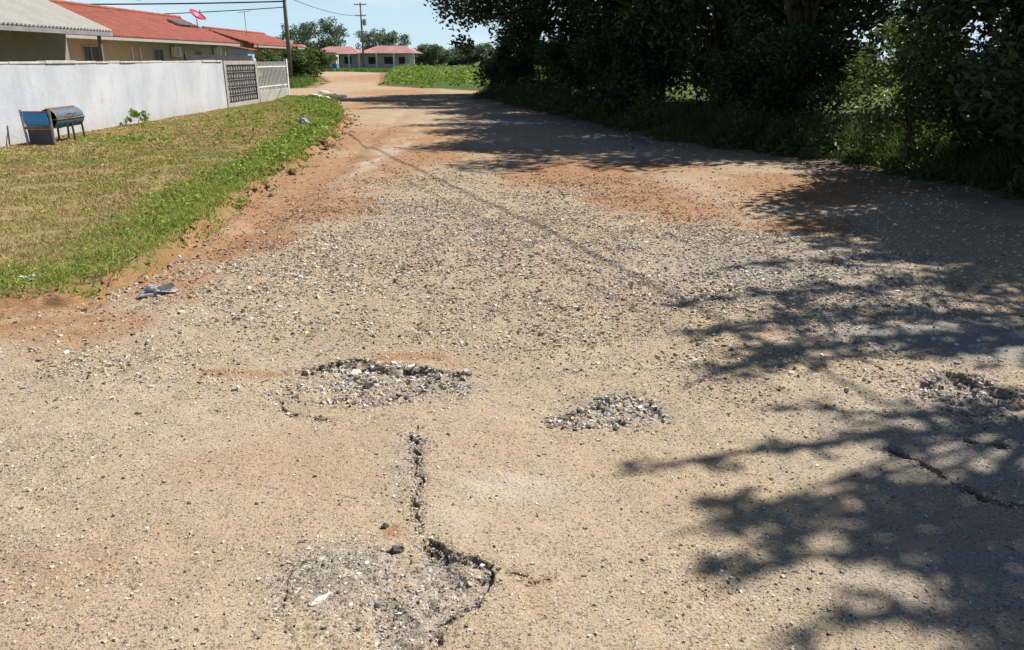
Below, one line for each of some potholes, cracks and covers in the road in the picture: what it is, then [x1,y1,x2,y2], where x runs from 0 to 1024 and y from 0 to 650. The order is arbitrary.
pothole [264,533,508,650]
pothole [279,356,479,412]
crack [403,424,431,548]
pothole [911,370,1024,425]
crack [871,445,1024,510]
crack [492,565,552,587]
pothole [538,391,676,438]
